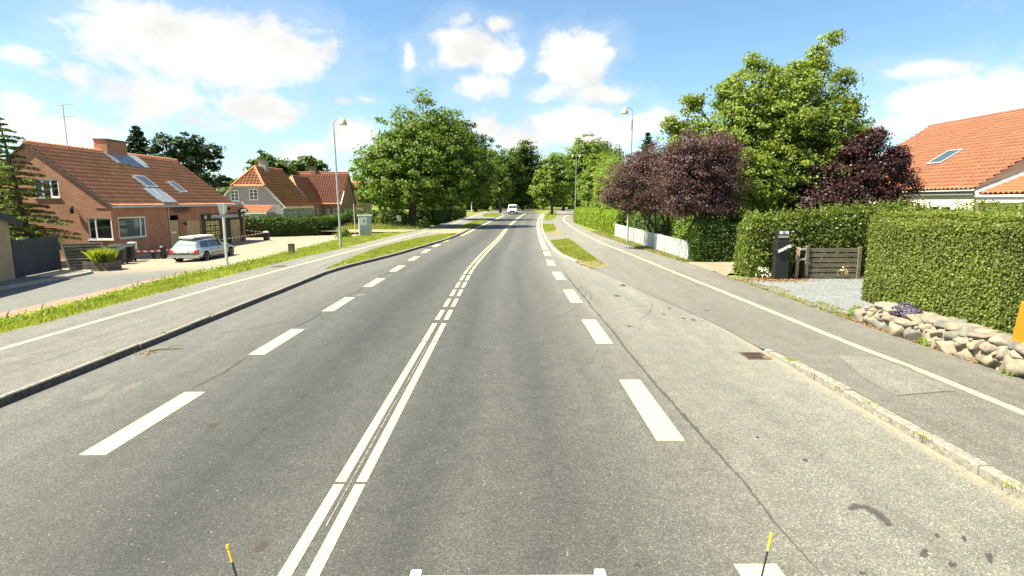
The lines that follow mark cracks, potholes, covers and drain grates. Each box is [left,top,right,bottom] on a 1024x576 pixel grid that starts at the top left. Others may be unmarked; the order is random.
drain grate [738,352,772,360]
